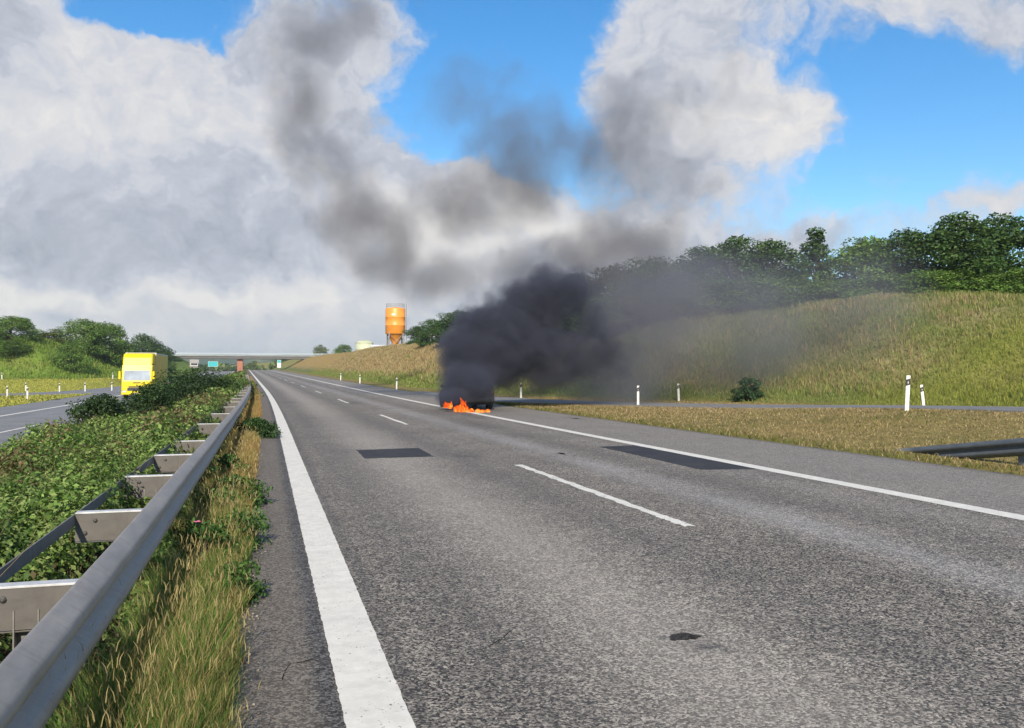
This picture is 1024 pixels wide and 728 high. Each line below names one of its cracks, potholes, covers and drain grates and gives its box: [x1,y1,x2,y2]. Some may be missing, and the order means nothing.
pothole [669,632,702,641]
